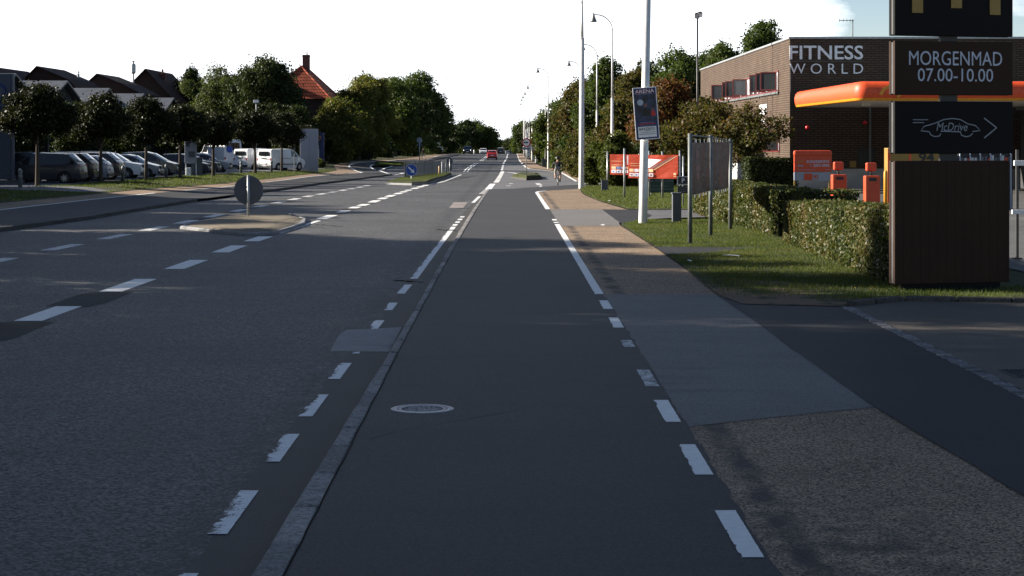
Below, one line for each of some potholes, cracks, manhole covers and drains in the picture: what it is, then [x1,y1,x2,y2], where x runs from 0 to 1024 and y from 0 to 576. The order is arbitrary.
manhole cover [391,404,454,414]
